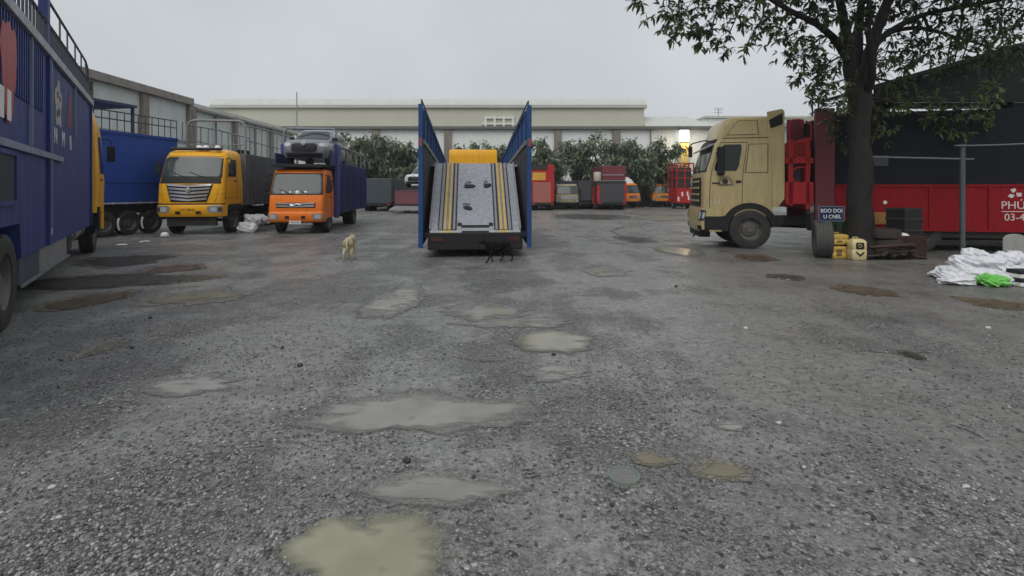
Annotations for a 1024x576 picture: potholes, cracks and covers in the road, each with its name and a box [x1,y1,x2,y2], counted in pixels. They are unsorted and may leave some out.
manhole cover [607,466,641,486]
pothole [135,372,246,400]
pothole [652,246,704,256]
pothole [288,390,554,435]
pothole [278,508,457,576]
pothole [709,418,749,431]
pothole [356,284,426,319]
pothole [351,469,531,509]
pothole [629,450,680,468]
pothole [683,457,755,482]
pothole [439,302,534,322]
pothole [511,329,595,355]
